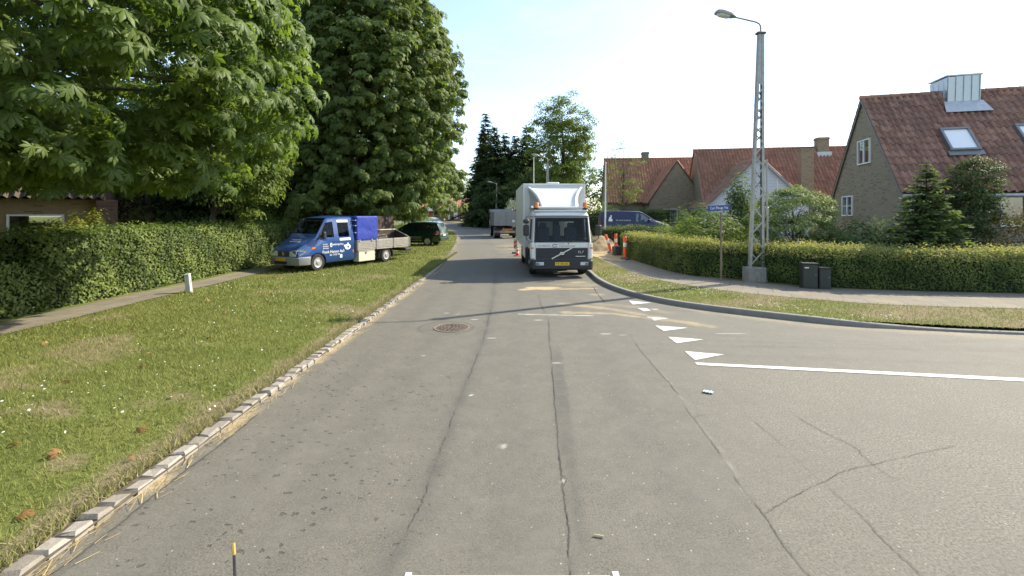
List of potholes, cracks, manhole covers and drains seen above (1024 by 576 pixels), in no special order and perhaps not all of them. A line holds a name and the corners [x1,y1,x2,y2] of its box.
manhole cover [434,323,470,333]
crack [540,303,572,575]
crack [719,383,954,576]
